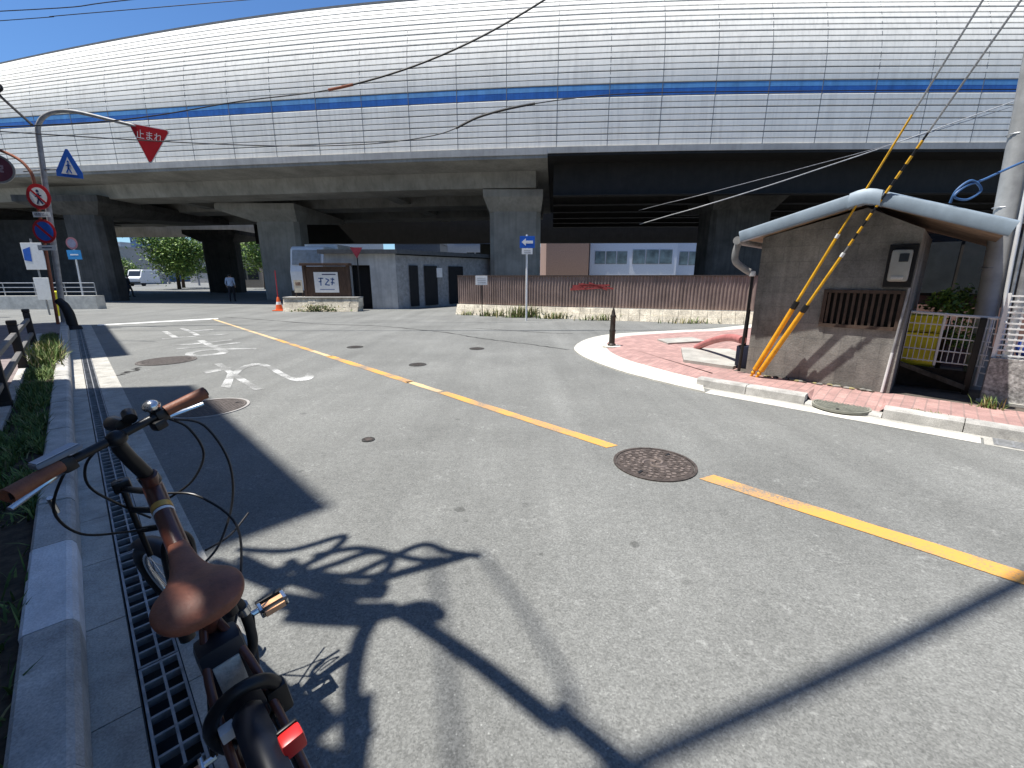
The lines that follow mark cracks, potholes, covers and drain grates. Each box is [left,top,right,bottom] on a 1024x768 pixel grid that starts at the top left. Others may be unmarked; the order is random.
manhole cover [613,447,698,482]
manhole cover [173,398,250,419]
manhole cover [812,399,872,415]
manhole cover [135,356,197,366]
